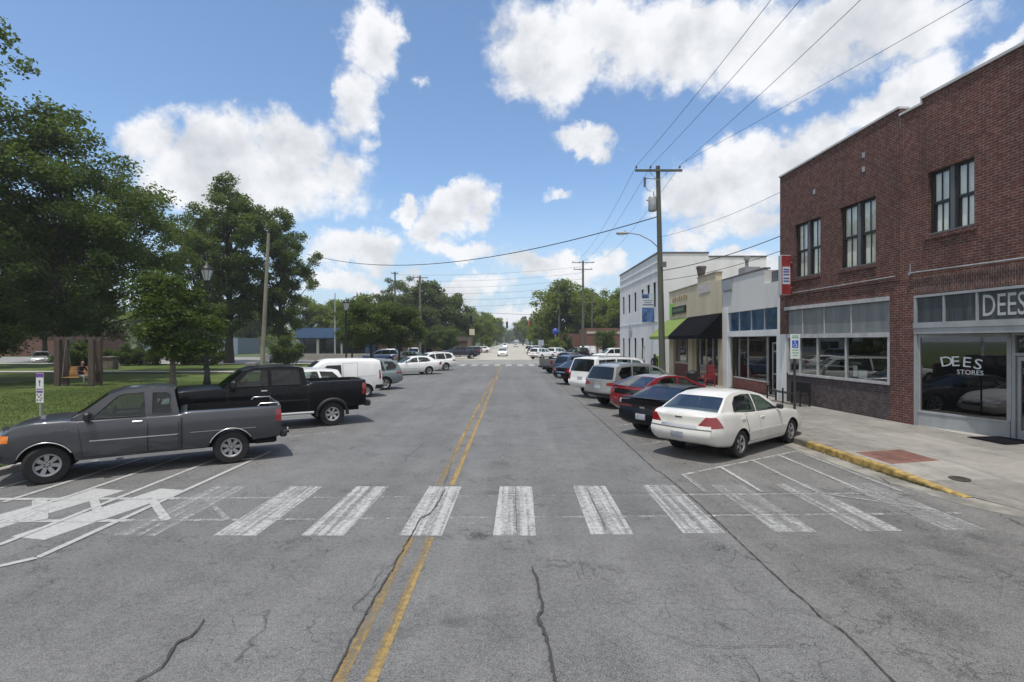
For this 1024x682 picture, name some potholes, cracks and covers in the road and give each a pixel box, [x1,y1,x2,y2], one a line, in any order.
crack [15,596,204,682]
